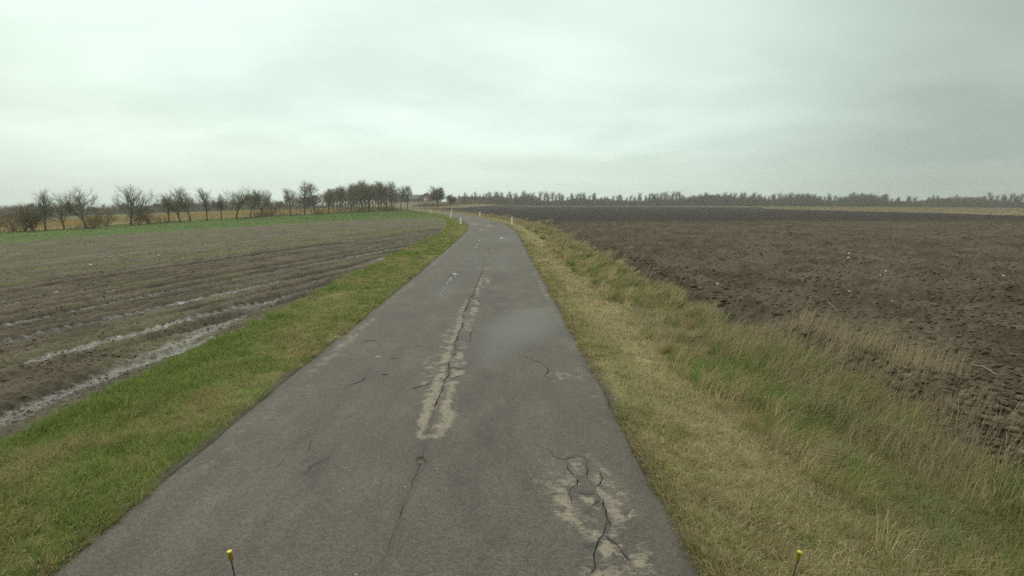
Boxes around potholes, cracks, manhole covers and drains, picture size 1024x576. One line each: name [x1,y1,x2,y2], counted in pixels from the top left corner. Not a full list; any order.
crack [536,444,630,574]
crack [408,265,481,428]
